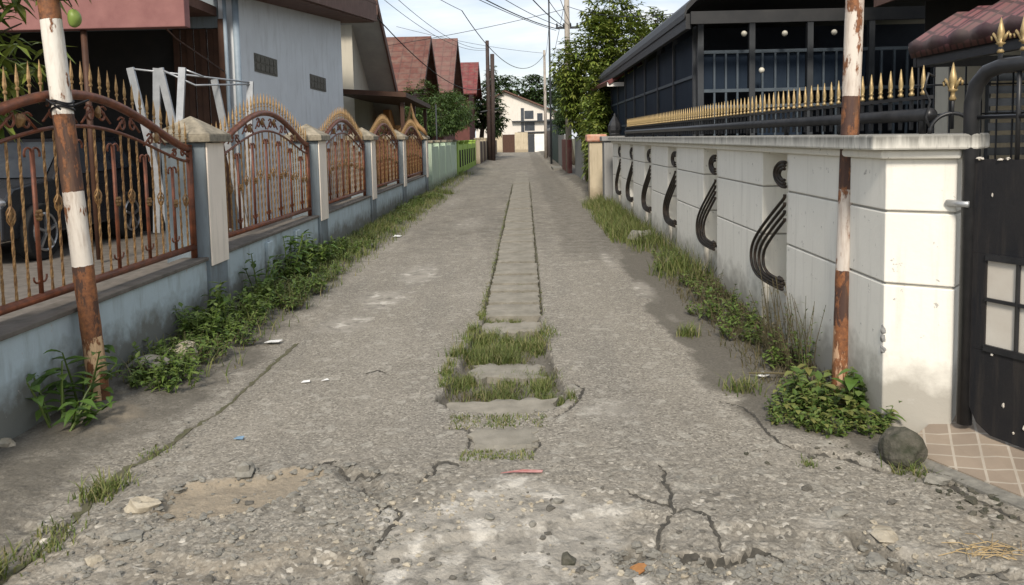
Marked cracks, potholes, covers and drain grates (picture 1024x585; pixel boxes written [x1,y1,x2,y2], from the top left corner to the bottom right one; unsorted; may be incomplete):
crack [629,465,789,570]
crack [720,401,792,449]
pothole [149,466,325,523]
crack [317,460,403,555]
crack [555,384,585,418]
